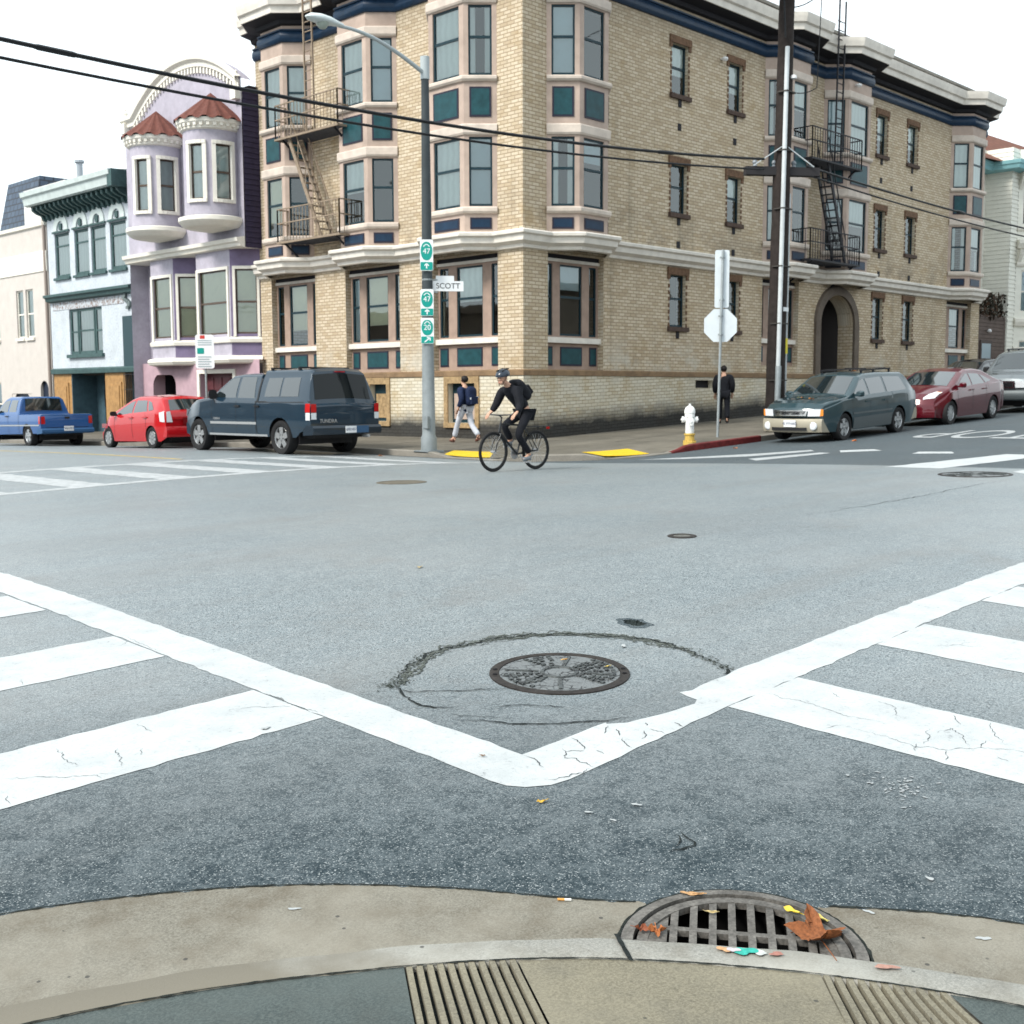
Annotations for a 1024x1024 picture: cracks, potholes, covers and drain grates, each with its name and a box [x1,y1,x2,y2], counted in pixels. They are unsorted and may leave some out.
manhole cover [489,653,630,695]
crack [669,832,696,851]
crack [377,630,737,780]
drain grate [621,890,870,961]
pothole [616,618,654,628]
